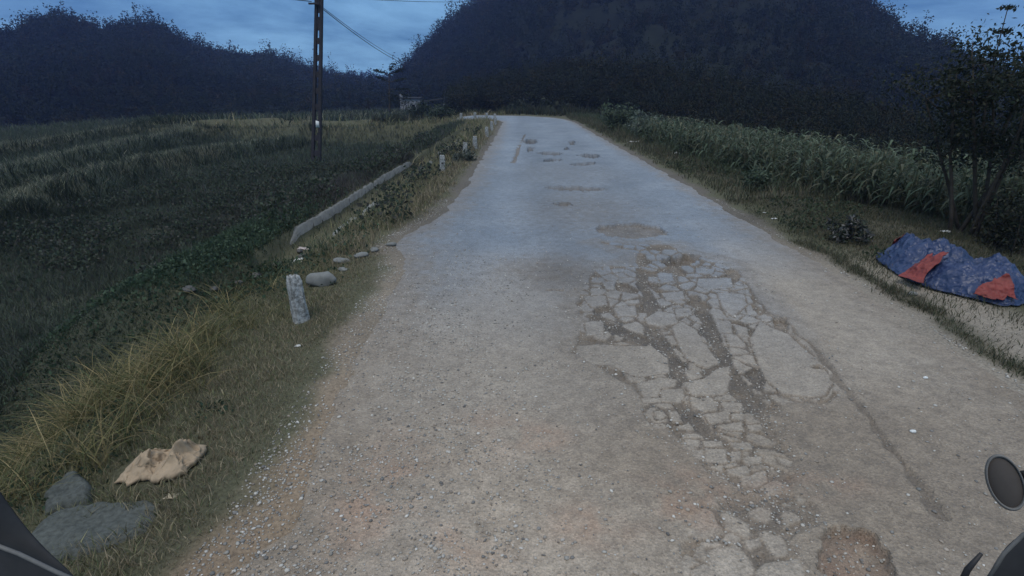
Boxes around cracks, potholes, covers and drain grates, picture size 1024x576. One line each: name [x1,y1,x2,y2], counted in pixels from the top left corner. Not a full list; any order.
pothole [594,223,669,239]
crack [544,241,844,576]
pothole [814,523,900,576]
crack [510,134,526,163]
